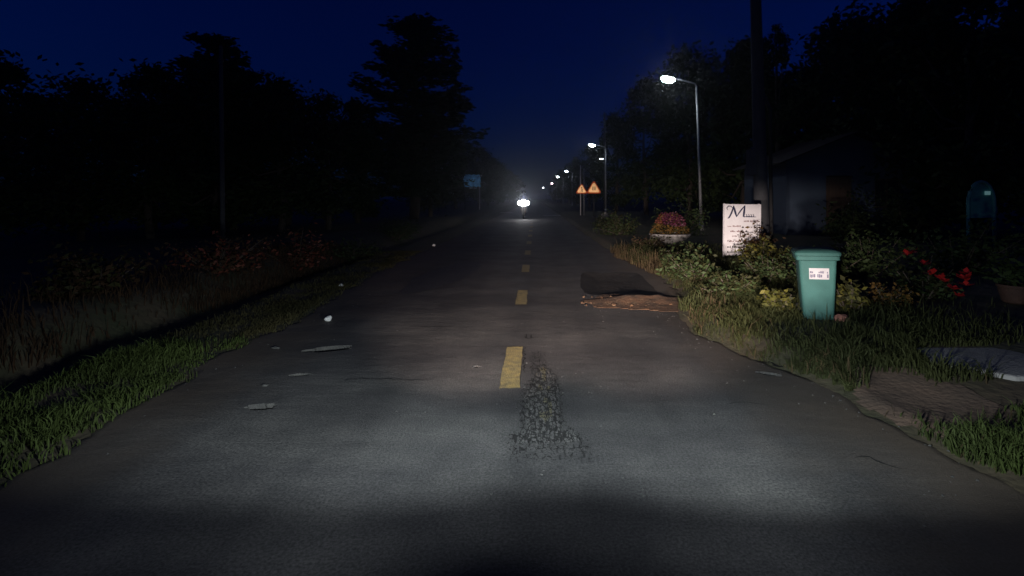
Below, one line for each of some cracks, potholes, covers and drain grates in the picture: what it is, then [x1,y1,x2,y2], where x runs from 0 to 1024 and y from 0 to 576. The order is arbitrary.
pothole [580,272,658,295]
